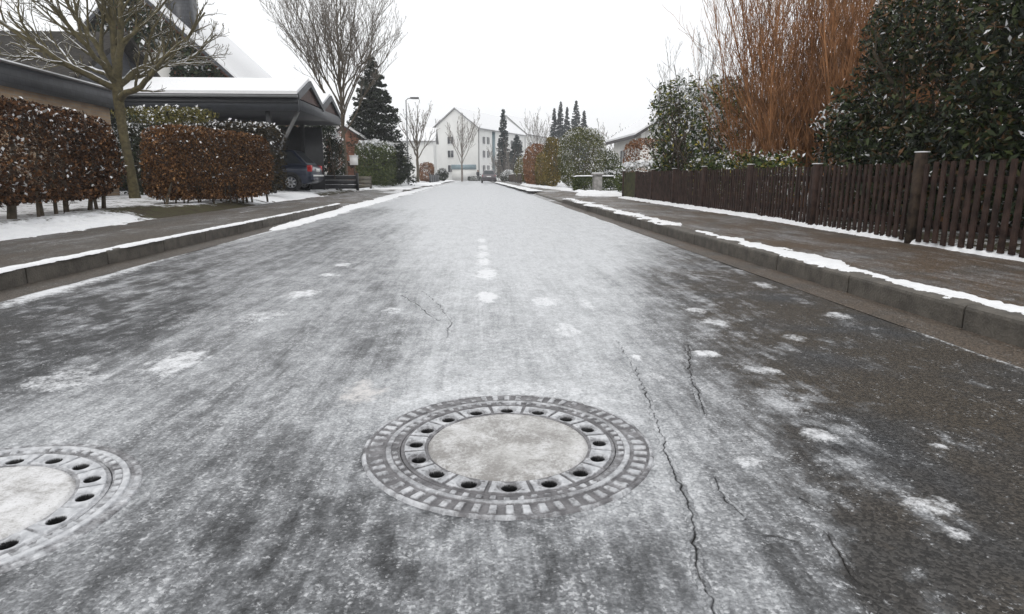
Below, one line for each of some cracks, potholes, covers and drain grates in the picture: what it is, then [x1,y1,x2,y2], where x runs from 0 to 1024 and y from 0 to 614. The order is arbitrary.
crack [401,291,457,338]
manhole cover [362,394,654,521]
manhole cover [0,443,143,575]
crack [616,341,907,614]
